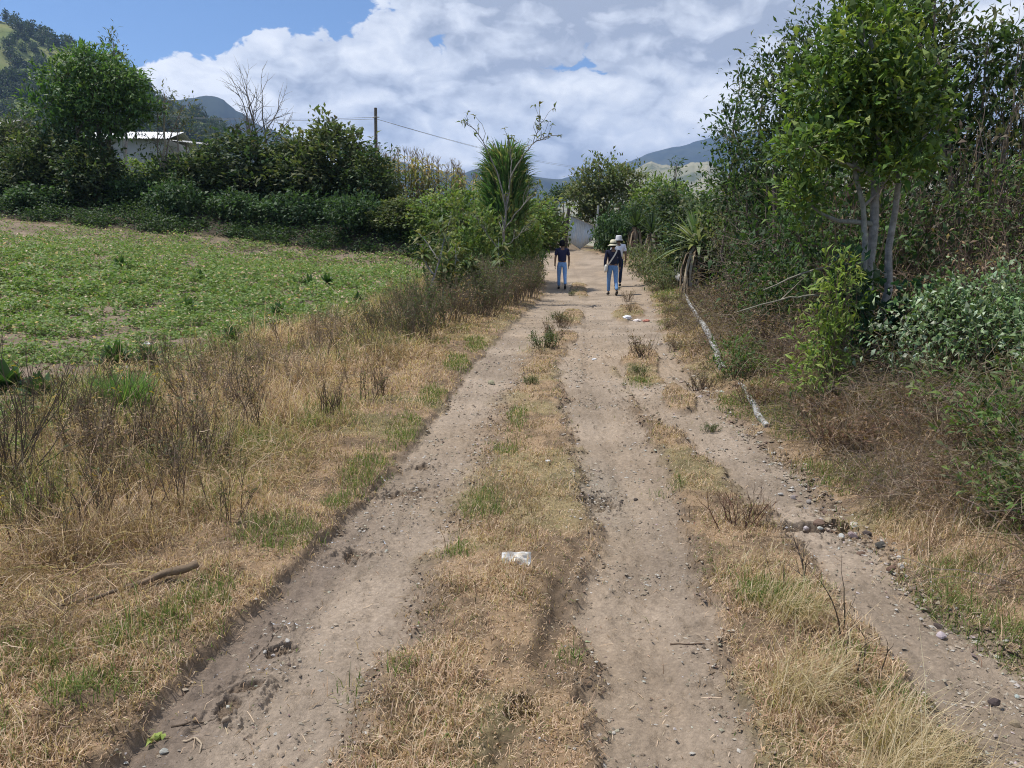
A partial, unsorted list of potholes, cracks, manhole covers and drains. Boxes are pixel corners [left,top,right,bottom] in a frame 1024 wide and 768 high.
pothole [210,693,244,725]
pothole [218,677,268,696]
